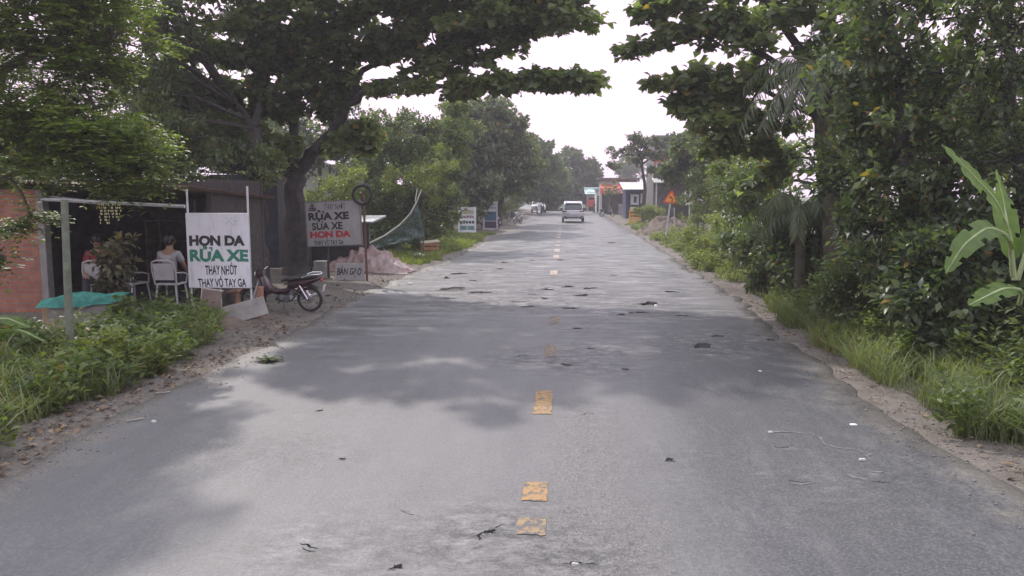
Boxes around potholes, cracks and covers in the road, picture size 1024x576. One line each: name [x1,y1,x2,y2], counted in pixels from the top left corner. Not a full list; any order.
pothole [690,343,717,351]
